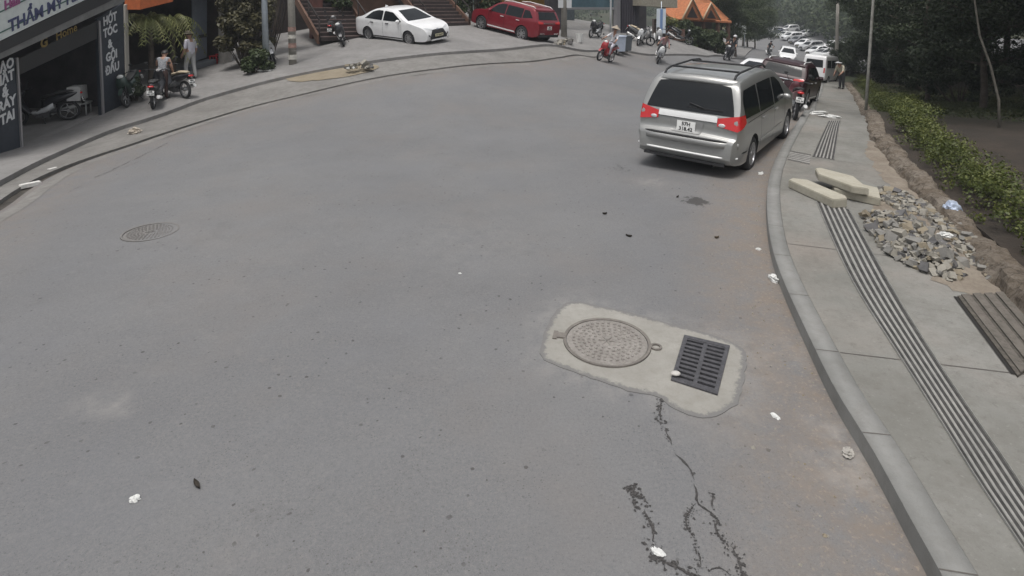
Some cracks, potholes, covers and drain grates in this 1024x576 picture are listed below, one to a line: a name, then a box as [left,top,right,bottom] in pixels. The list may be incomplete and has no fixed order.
drain grate [671,335,730,396]
manhole cover [120,222,180,242]
crack [623,398,748,576]
manhole cover [552,318,662,368]
